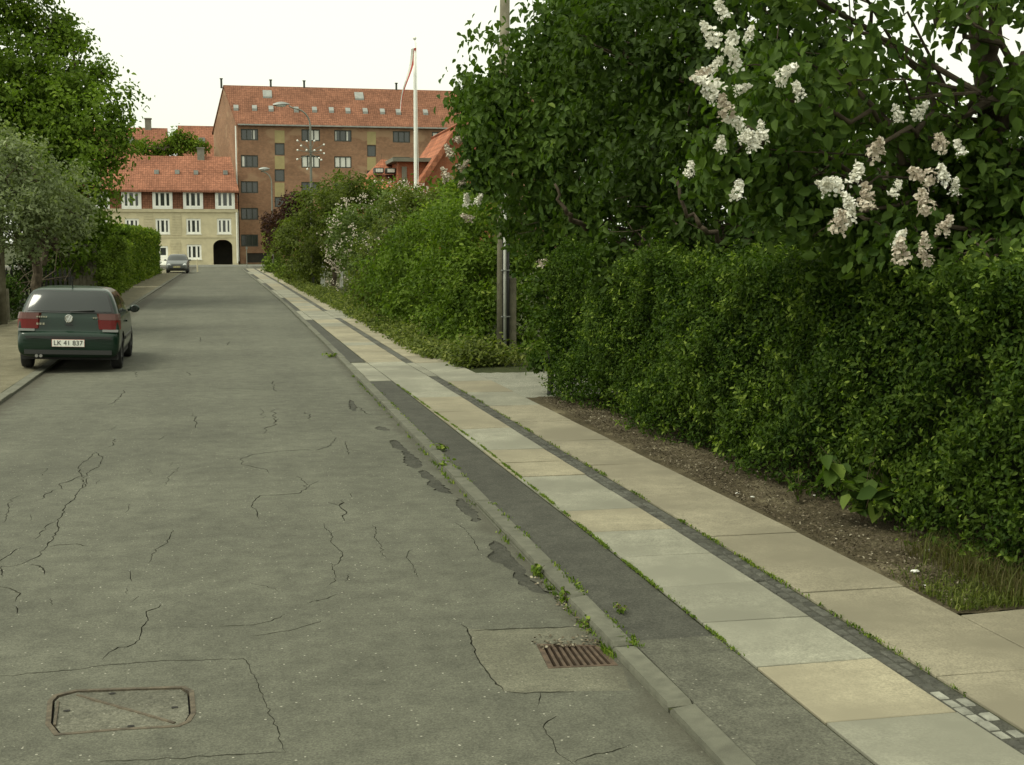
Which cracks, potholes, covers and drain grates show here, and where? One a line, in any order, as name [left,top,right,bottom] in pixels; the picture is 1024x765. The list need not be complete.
pothole [486,540,552,595]
crack [240,430,357,473]
drain grate [536,644,618,669]
pothole [390,440,423,469]
crack [218,617,321,636]
pothole [456,497,481,522]
crack [102,572,161,660]
crack [0,427,116,613]
pothole [418,470,453,494]
crack [309,492,353,603]
manhole cover [45,686,196,736]
crack [537,693,631,765]
